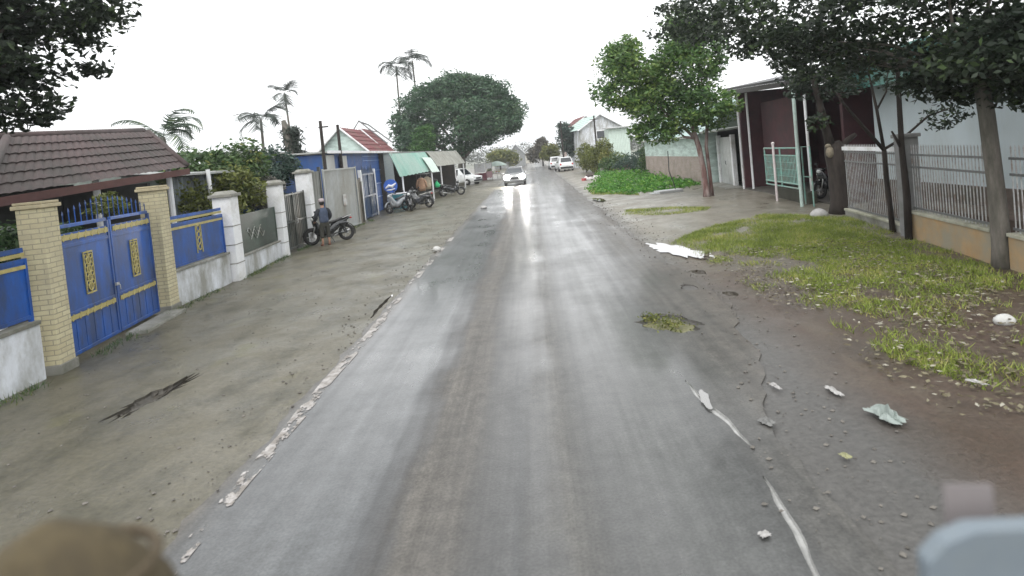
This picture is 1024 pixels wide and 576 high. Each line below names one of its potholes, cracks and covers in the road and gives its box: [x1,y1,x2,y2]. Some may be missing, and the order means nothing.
pothole [636,311,705,333]
crack [686,381,752,446]
crack [764,477,819,576]
